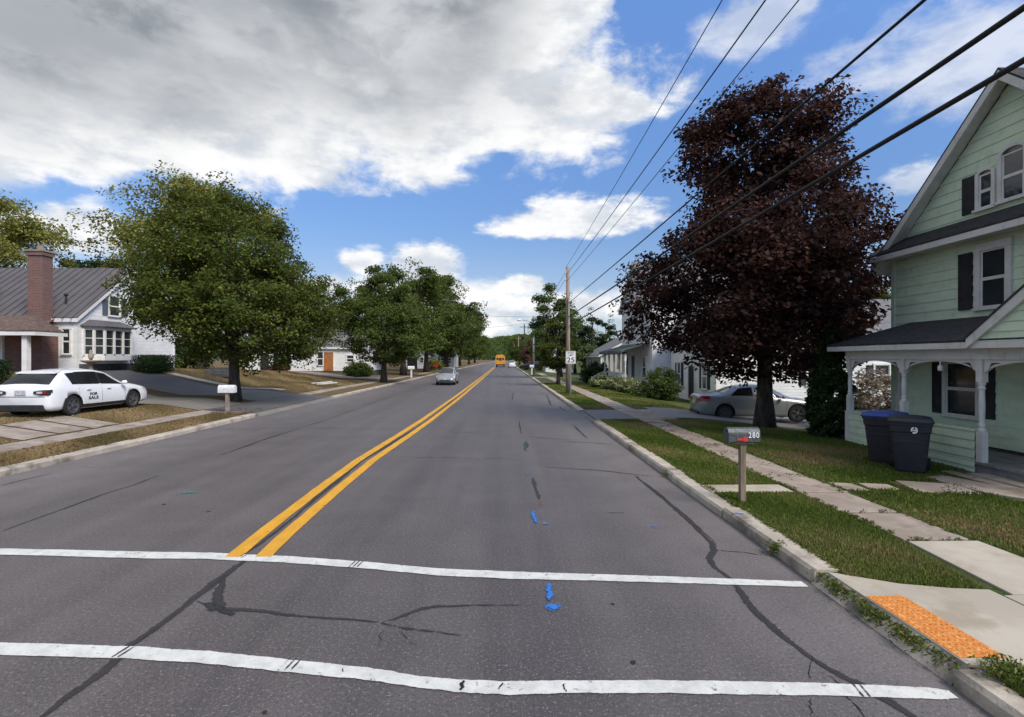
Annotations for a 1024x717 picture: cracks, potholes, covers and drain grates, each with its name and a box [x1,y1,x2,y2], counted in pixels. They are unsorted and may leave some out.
crack [808,655,865,717]
